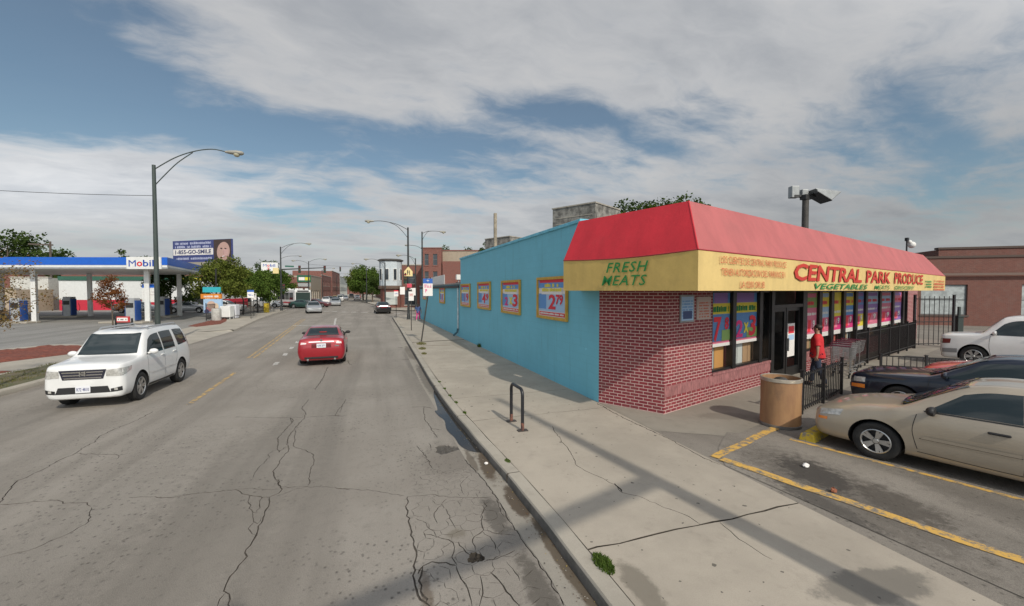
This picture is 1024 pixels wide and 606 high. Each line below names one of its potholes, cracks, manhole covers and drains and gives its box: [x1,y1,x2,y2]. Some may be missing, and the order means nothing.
crack [552,426,700,525]
crack [129,367,550,606]
pothole [467,552,485,563]
crack [0,412,152,557]
